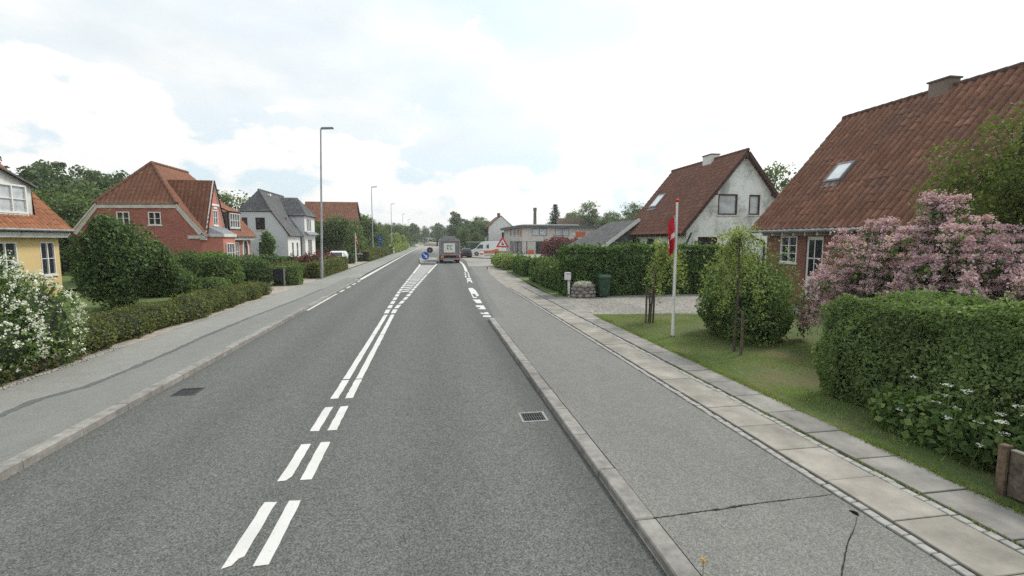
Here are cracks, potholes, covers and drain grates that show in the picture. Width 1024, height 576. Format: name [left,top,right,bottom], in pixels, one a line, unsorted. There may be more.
drain grate [518,411,549,423]
crack [841,517,857,576]
drain grate [170,387,206,396]
crack [653,494,832,518]
